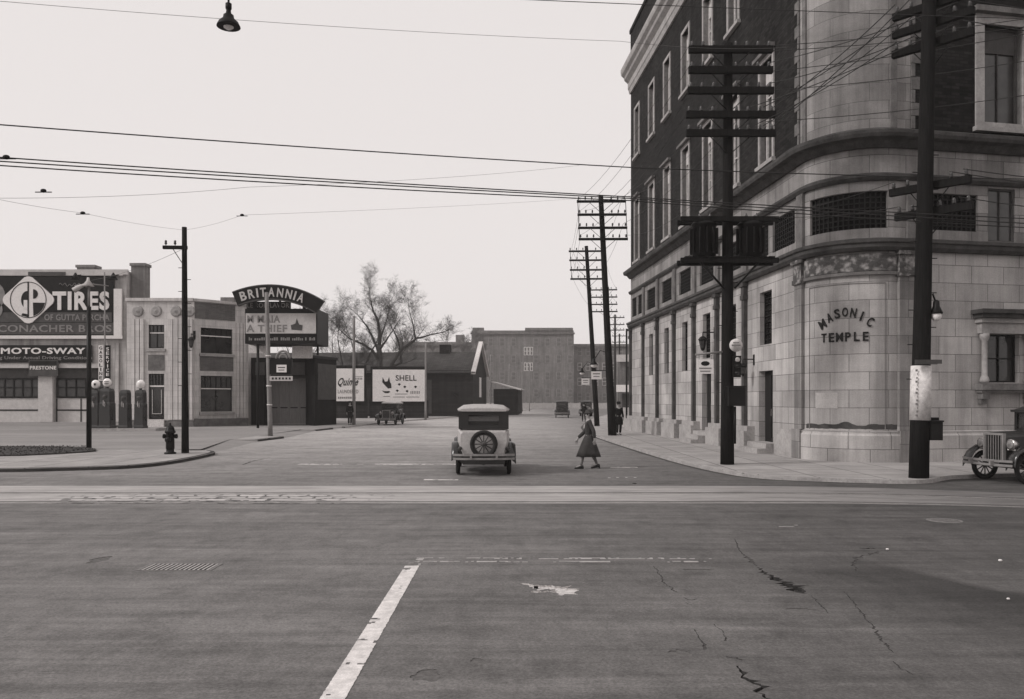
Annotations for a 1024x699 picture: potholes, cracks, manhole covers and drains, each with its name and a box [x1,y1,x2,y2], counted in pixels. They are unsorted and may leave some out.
crack [694,624,770,699]
drain grate [135,563,223,571]
crack [735,540,914,675]
